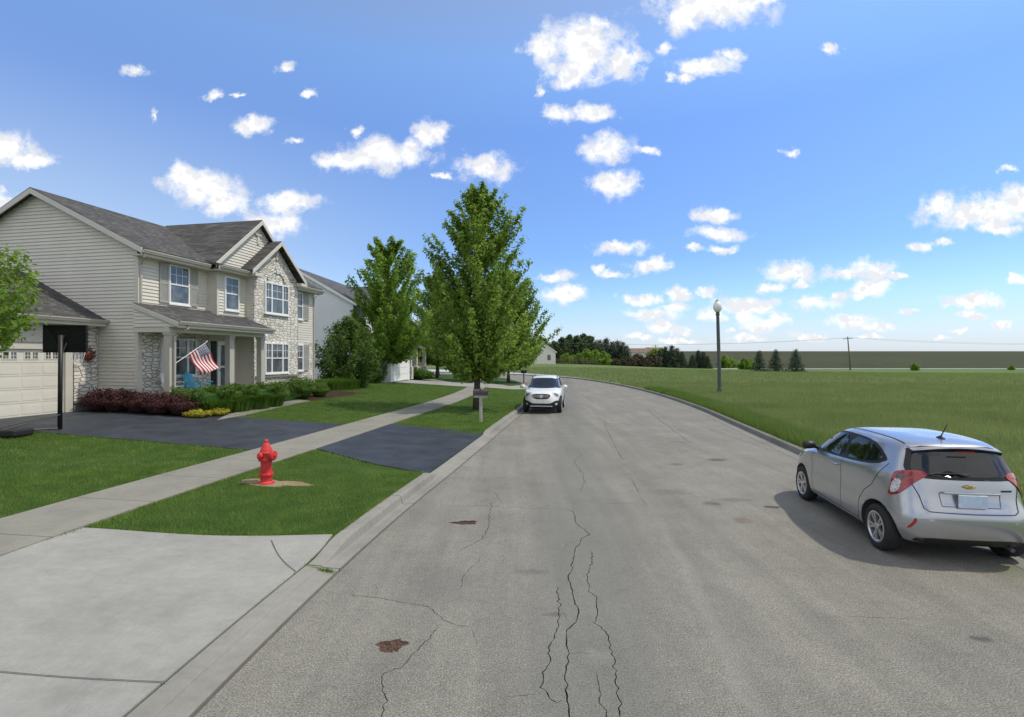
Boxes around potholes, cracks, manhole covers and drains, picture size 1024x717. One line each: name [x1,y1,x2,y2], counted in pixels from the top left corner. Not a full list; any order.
crack [522,510,622,717]
crack [354,587,477,717]
